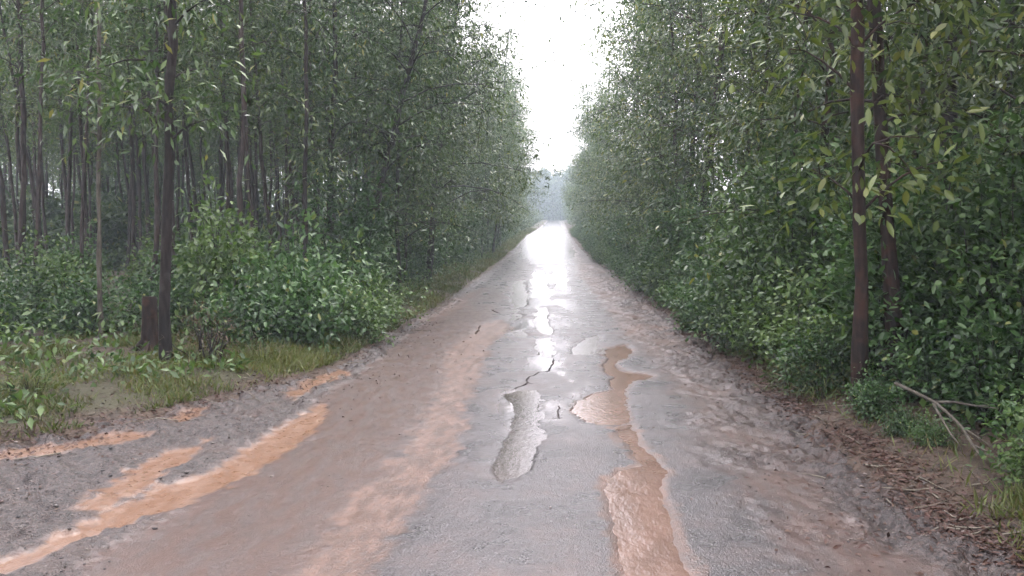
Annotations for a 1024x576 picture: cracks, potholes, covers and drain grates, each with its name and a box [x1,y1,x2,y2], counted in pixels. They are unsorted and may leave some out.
crack [497,358,572,421]
crack [468,309,501,335]
pothole [478,387,567,487]
